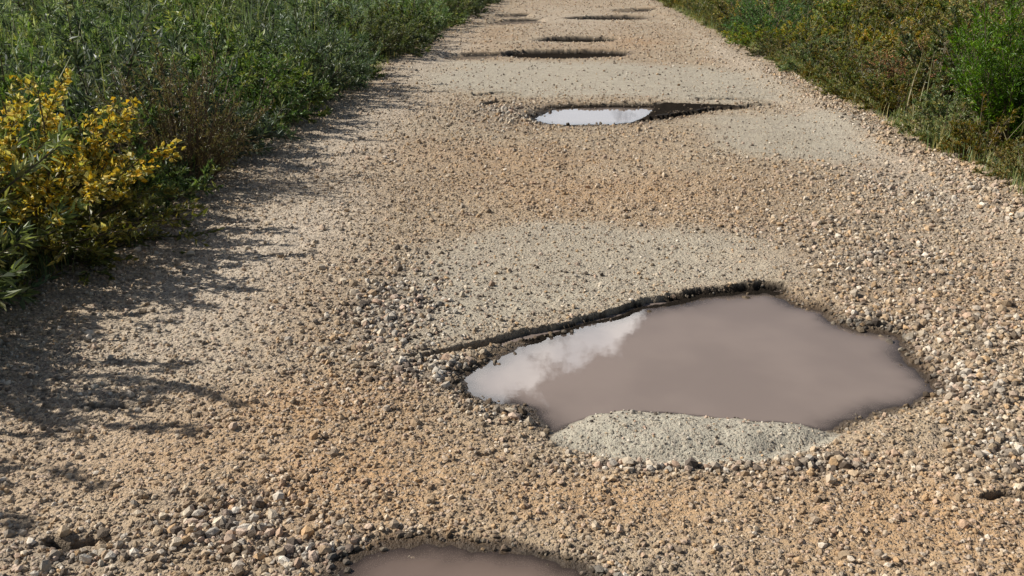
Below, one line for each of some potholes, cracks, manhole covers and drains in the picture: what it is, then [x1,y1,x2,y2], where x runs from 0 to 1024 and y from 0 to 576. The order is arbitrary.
pothole [301,522,632,576]
pothole [501,48,630,59]
pothole [525,101,753,127]
pothole [441,279,951,450]
